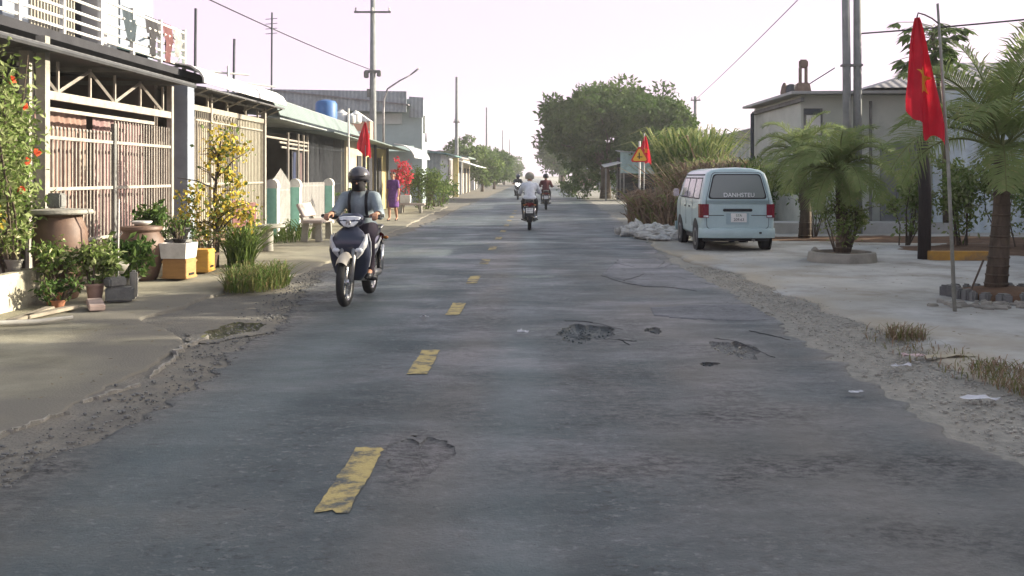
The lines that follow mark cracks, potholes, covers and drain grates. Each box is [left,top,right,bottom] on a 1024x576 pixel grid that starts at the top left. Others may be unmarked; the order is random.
pothole [694,338,778,363]
pothole [185,320,283,343]
pothole [363,431,482,491]
crack [716,330,789,357]
pothole [541,322,630,347]
